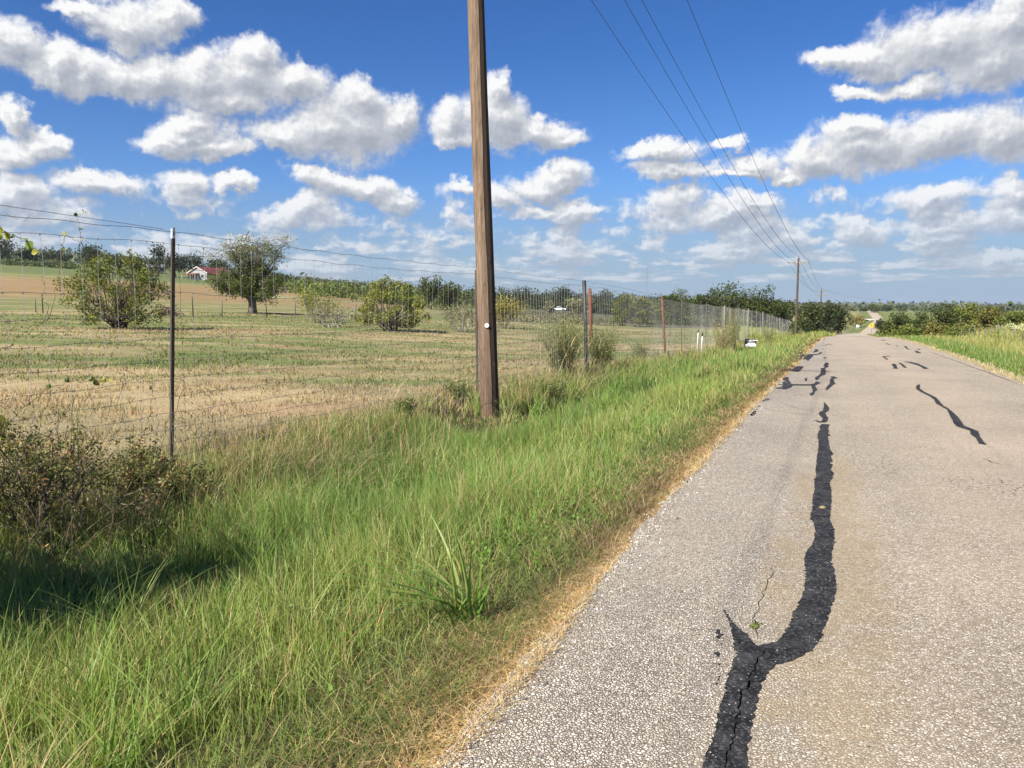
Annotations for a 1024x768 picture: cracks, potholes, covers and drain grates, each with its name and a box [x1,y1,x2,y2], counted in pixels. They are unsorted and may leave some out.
crack [749,568,774,643]
